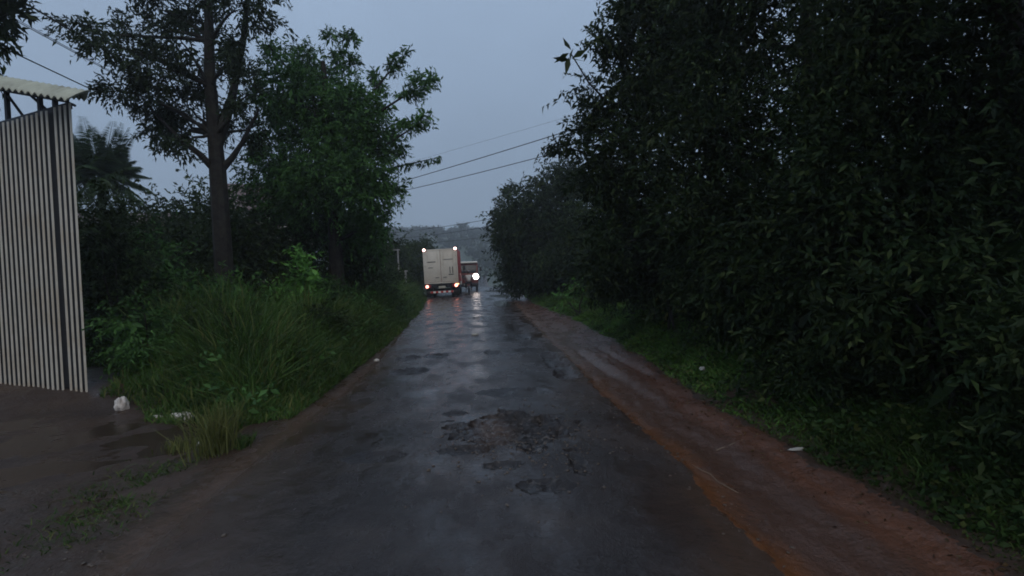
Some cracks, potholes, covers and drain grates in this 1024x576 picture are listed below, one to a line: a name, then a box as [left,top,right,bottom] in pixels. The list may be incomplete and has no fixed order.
pothole [482,460,526,470]
pothole [540,350,583,379]
pothole [566,455,595,476]
pothole [389,367,431,376]
pothole [440,409,603,455]
pothole [475,387,563,399]
pothole [514,478,577,495]
